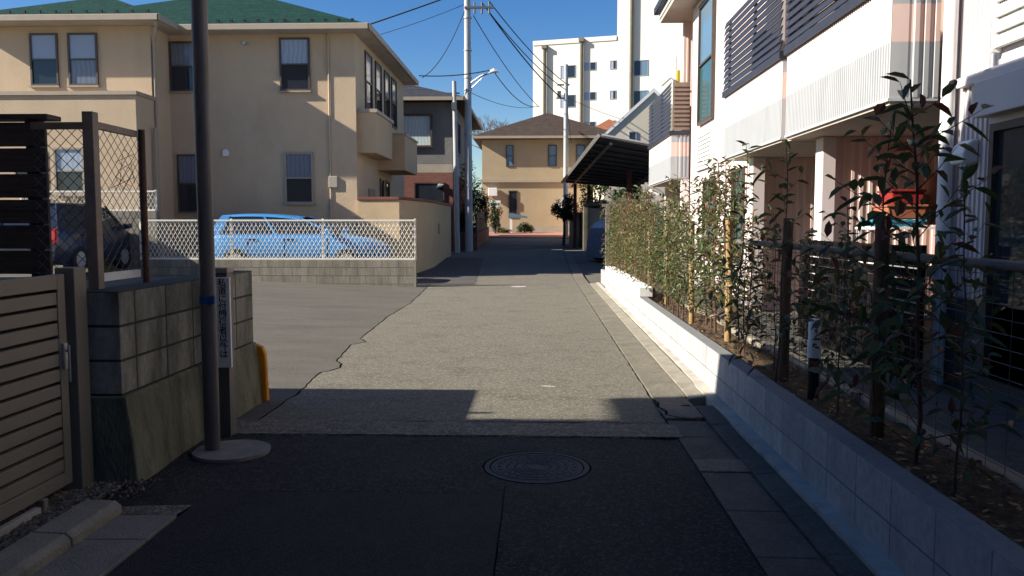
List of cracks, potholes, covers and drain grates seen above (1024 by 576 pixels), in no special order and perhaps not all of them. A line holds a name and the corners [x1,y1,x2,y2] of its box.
crack [652,398,699,418]
manhole cover [483,452,591,484]
crack [258,284,431,420]
